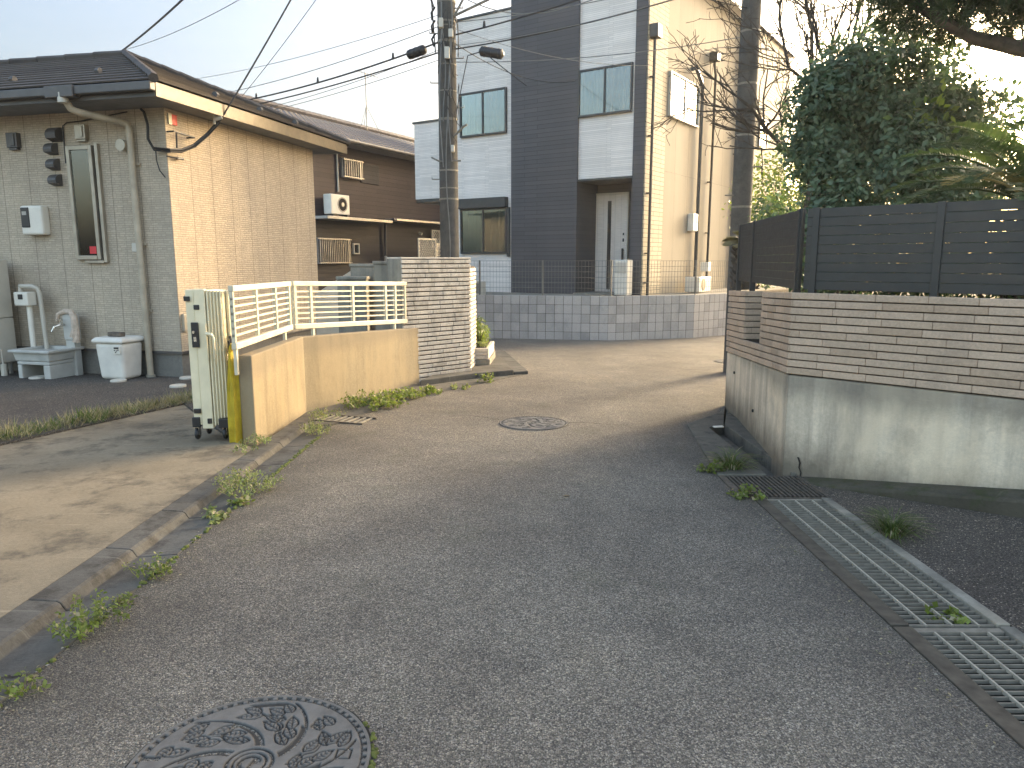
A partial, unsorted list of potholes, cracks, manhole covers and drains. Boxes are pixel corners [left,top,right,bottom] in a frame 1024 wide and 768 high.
drain grate [719,475,830,499]
drain grate [312,414,377,425]
manhole cover [125,695,379,768]
manhole cover [499,416,569,430]
drain grate [893,627,1024,750]
drain grate [755,498,1010,629]
